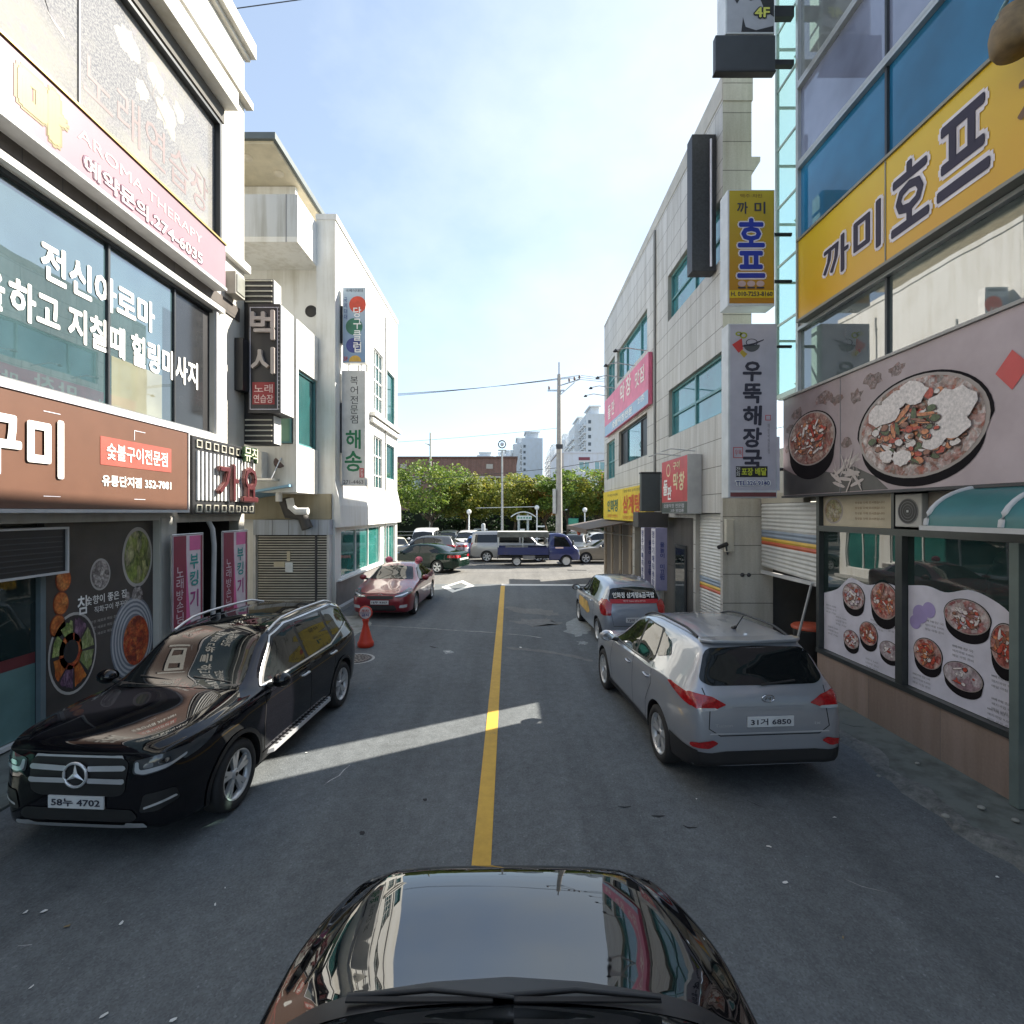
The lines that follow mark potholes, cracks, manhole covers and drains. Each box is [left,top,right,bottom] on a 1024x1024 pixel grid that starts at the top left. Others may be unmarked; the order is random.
manhole cover [354,653,375,664]
